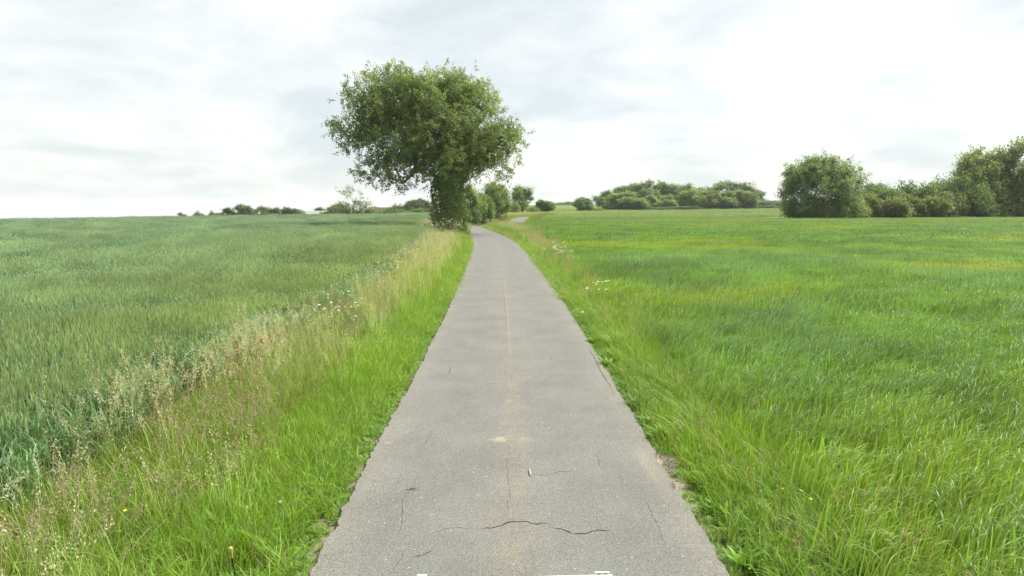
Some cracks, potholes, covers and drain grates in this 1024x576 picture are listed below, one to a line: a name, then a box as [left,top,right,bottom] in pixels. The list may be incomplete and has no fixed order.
crack [422,456,612,538]
